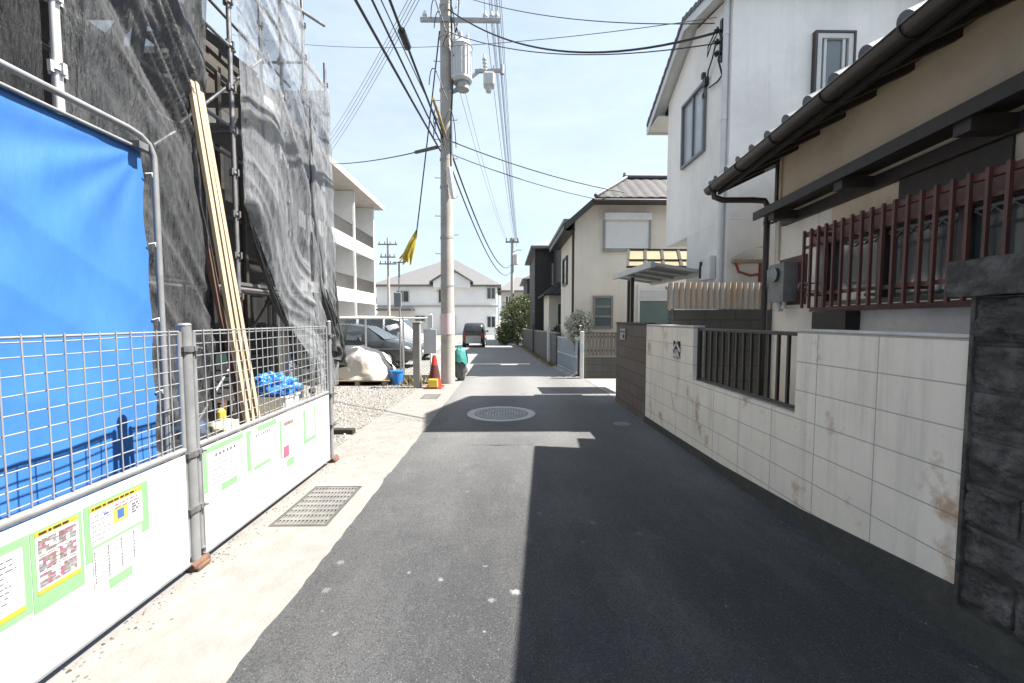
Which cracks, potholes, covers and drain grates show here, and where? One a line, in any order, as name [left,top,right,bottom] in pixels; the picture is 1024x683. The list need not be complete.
manhole cover [467,406,535,422]
